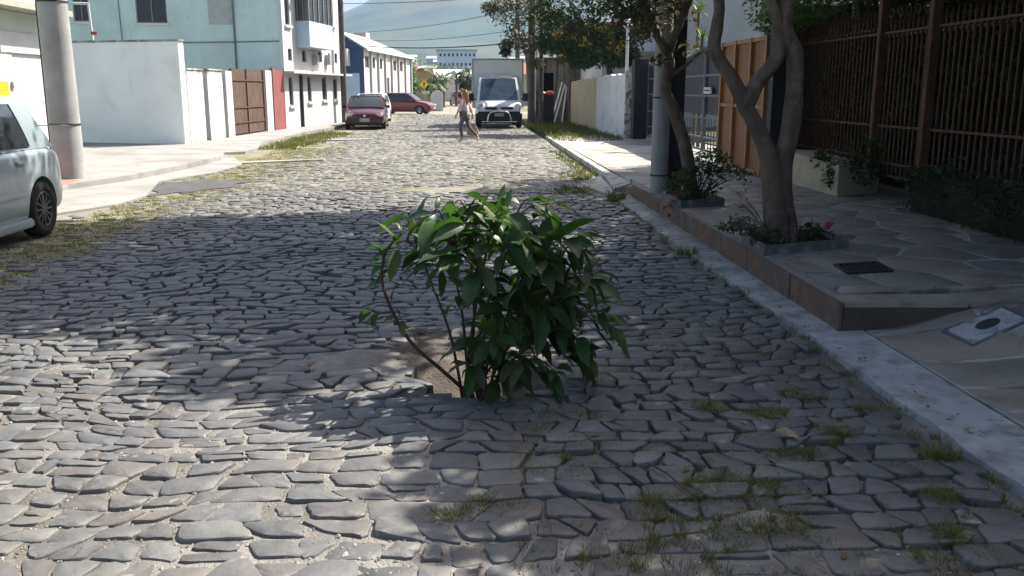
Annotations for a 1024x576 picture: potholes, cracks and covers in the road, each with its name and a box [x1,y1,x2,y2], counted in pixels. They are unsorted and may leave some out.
pothole [390,327,551,400]
drain grate [833,261,894,274]
manhole cover [940,306,1024,347]
